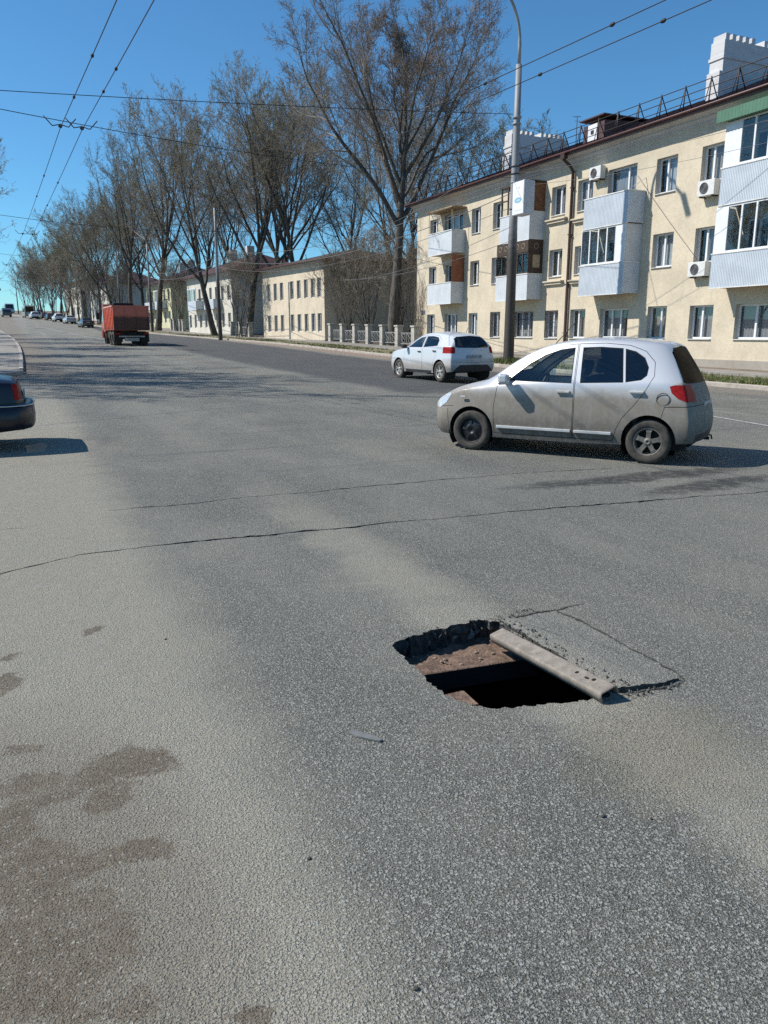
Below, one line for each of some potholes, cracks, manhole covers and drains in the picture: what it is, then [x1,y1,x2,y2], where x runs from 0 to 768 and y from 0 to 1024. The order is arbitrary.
crack [123,468,609,510]
pothole [392,619,610,706]
crack [488,604,685,695]
crack [0,491,768,574]
